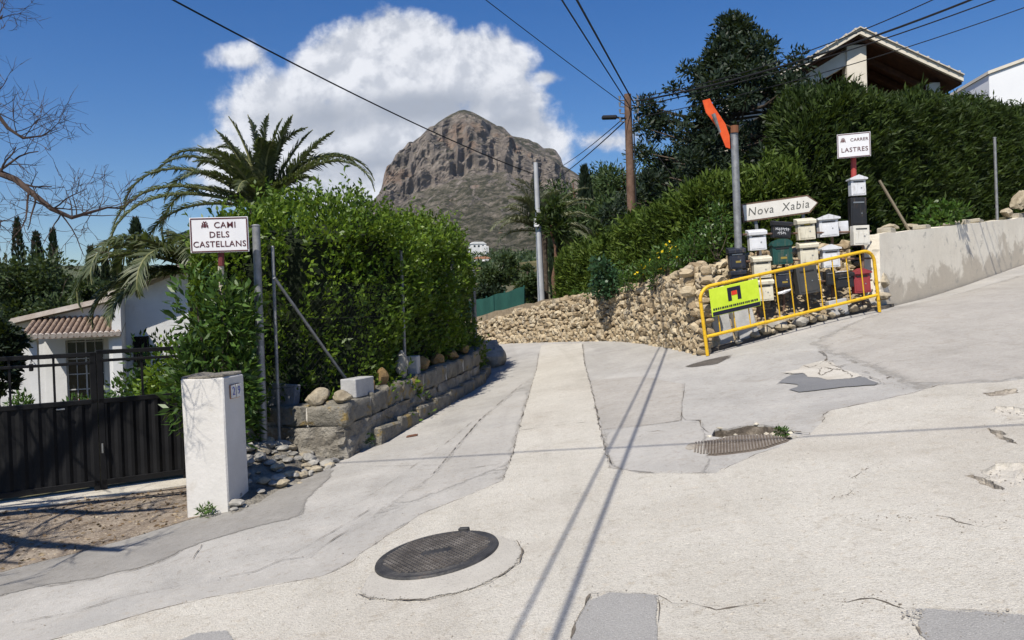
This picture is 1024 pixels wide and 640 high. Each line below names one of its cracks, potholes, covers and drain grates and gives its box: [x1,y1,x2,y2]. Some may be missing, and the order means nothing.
pothole [983,388,1018,397]
pothole [987,428,1017,444]
pothole [980,462,1024,487]
crack [560,589,1022,638]
manhole cover [375,527,499,580]
pothole [991,406,1024,420]
crack [783,351,947,436]
crack [362,345,775,552]
pothole [967,475,1004,490]
